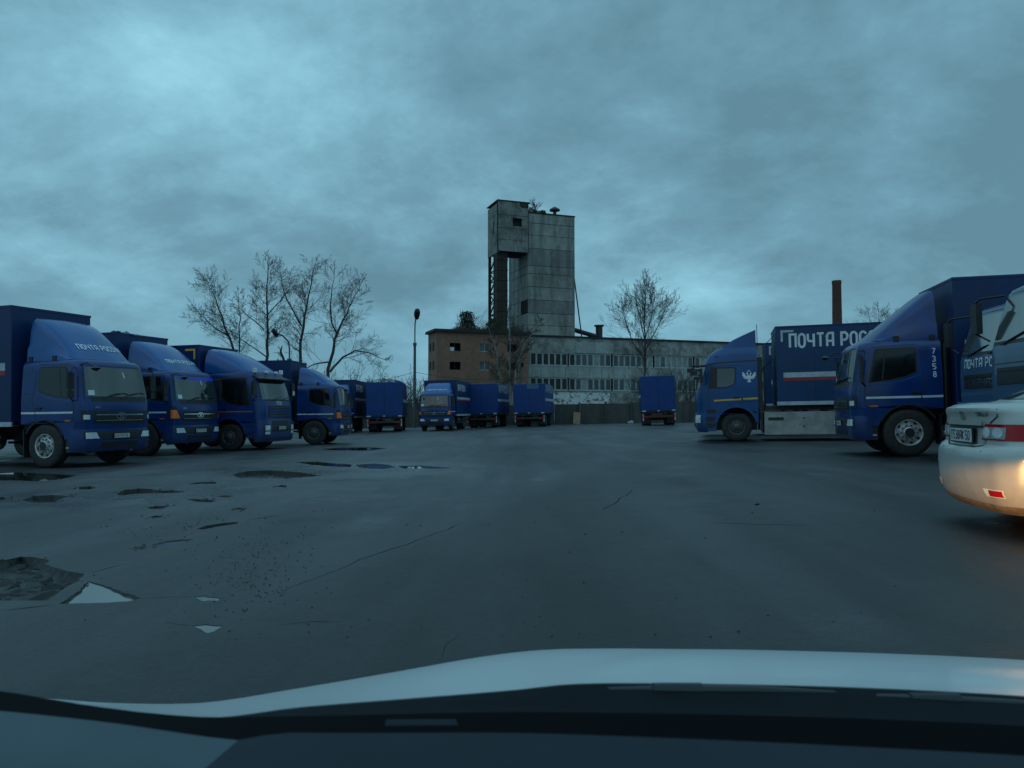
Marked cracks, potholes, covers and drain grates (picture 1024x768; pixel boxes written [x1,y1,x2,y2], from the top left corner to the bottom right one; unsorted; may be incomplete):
pothole [232,470,321,479]
pothole [134,539,193,548]
pothole [17,494,77,503]
pothole [0,556,89,601]
pothole [190,522,238,530]
pothole [0,471,76,482]
